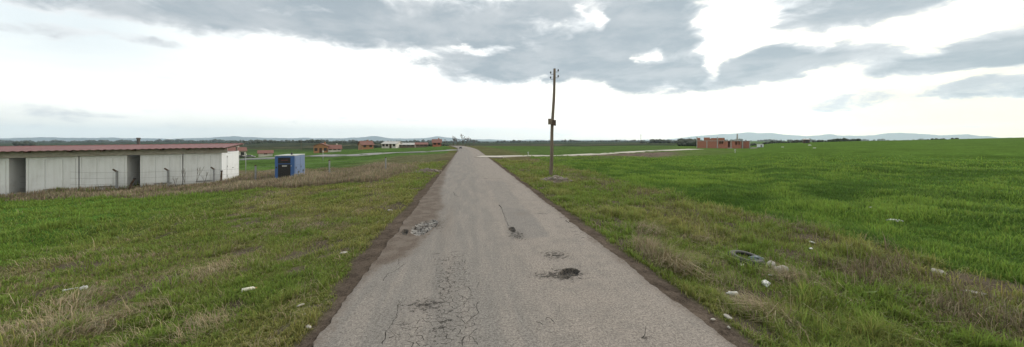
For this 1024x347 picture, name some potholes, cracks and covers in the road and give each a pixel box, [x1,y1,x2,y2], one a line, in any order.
crack [382,251,480,347]
pothole [558,268,580,279]
pothole [411,219,439,236]
